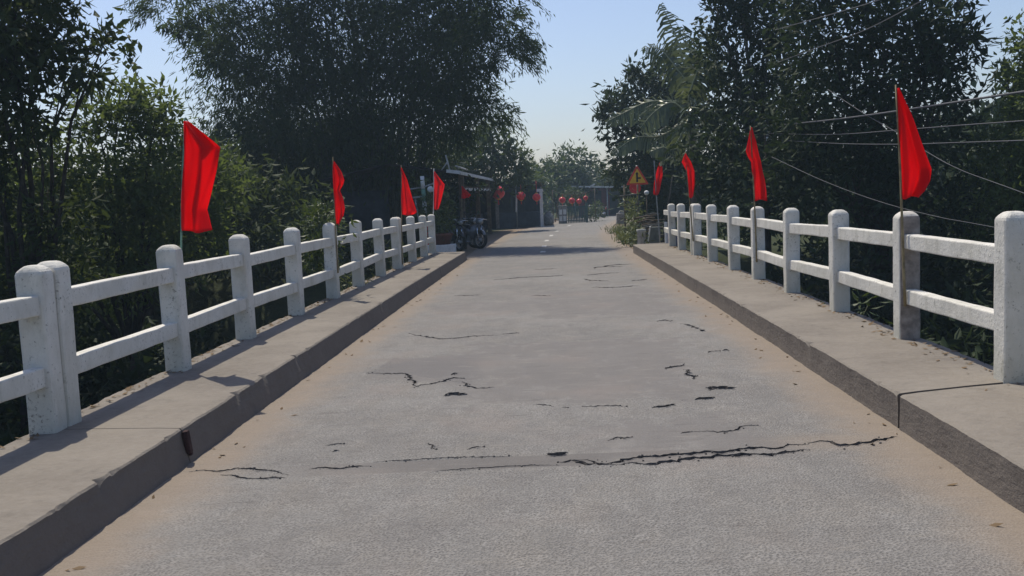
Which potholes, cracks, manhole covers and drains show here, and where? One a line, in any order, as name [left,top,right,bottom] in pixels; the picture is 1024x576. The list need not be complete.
crack [365,372,494,389]
crack [657,319,701,330]
crack [664,350,721,379]
crack [408,332,517,340]
crack [495,264,647,288]
crack [374,400,810,472]
